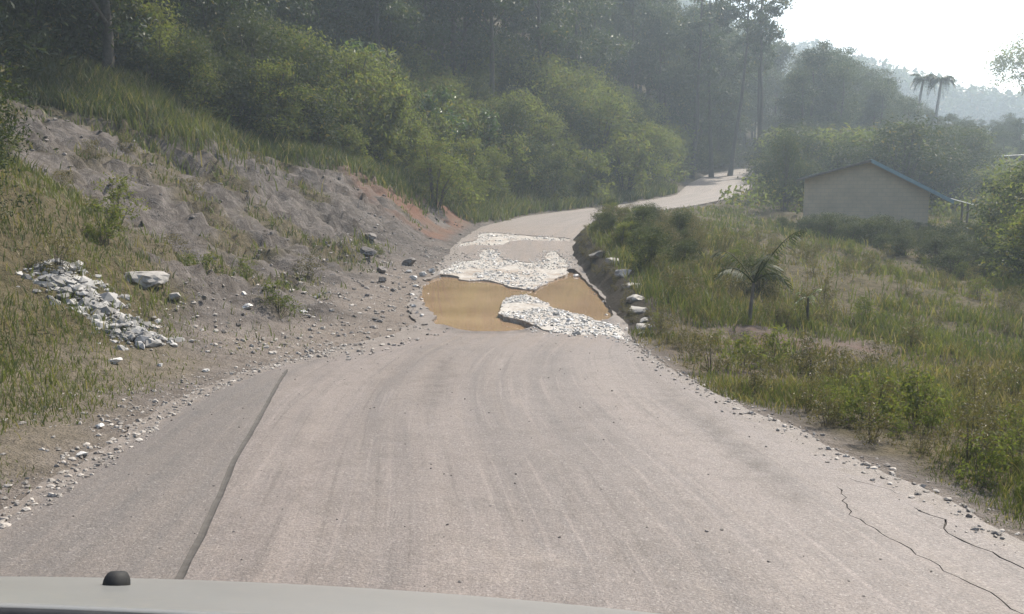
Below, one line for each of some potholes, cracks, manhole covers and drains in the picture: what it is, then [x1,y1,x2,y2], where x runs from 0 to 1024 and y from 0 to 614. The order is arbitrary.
pothole [534,272,612,321]
pothole [419,277,536,331]
pothole [439,249,569,291]
pothole [498,294,628,340]
pothole [460,232,570,246]
crack [839,480,1022,614]
